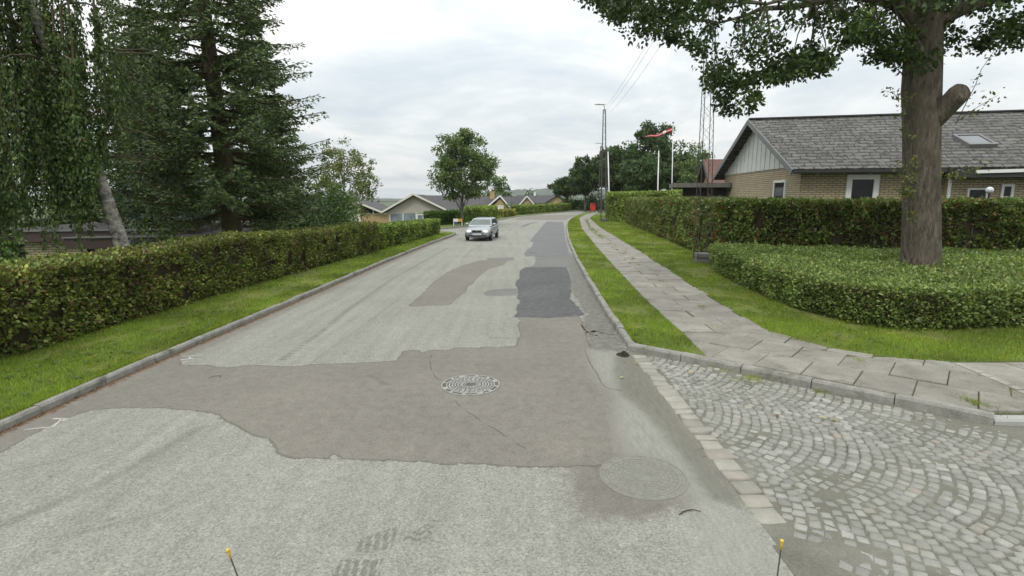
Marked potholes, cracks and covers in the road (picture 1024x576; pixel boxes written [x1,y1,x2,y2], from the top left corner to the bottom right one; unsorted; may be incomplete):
manhole cover [441,375,500,396]
manhole cover [599,455,689,501]
